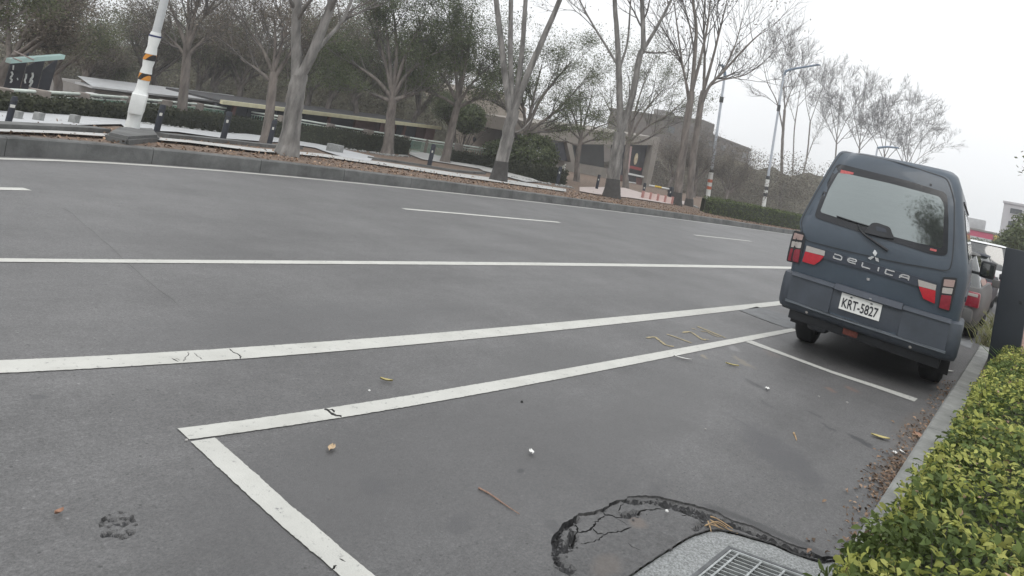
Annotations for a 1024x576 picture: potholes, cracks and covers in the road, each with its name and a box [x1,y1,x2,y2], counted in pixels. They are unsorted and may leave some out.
drain grate [632,532,838,576]
pothole [98,511,144,540]
pothole [551,495,833,576]
